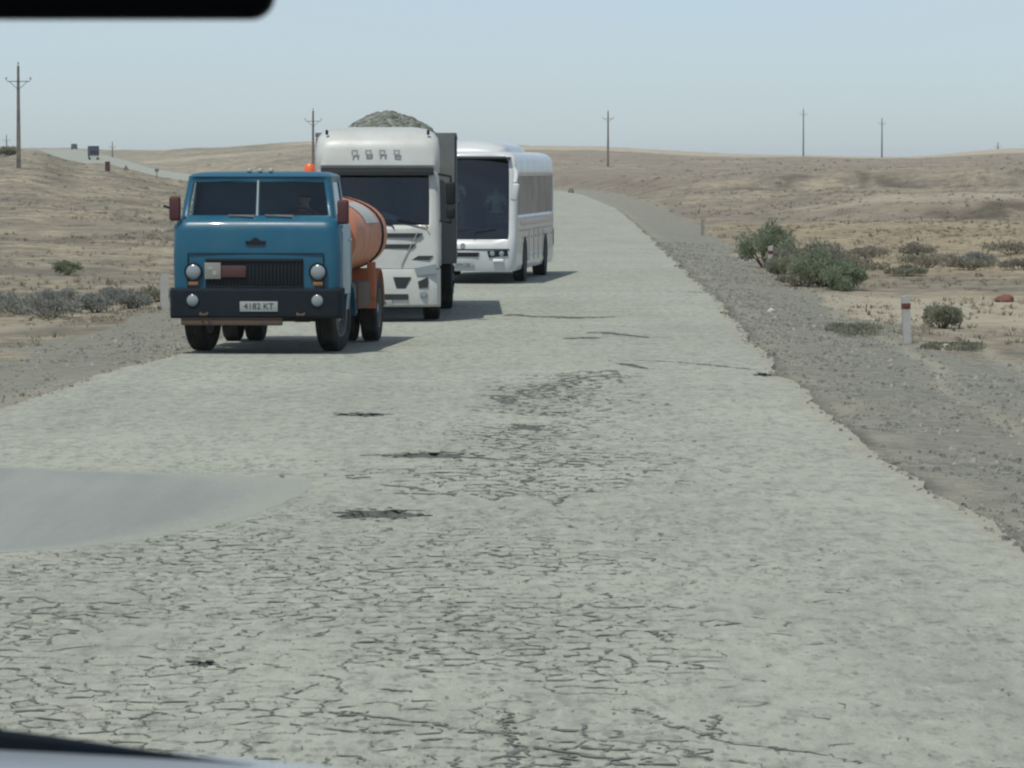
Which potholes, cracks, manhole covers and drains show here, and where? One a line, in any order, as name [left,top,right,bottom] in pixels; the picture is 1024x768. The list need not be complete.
crack [0,487,1024,768]
crack [215,360,831,540]
crack [510,314,648,340]
pothole [326,507,433,521]
